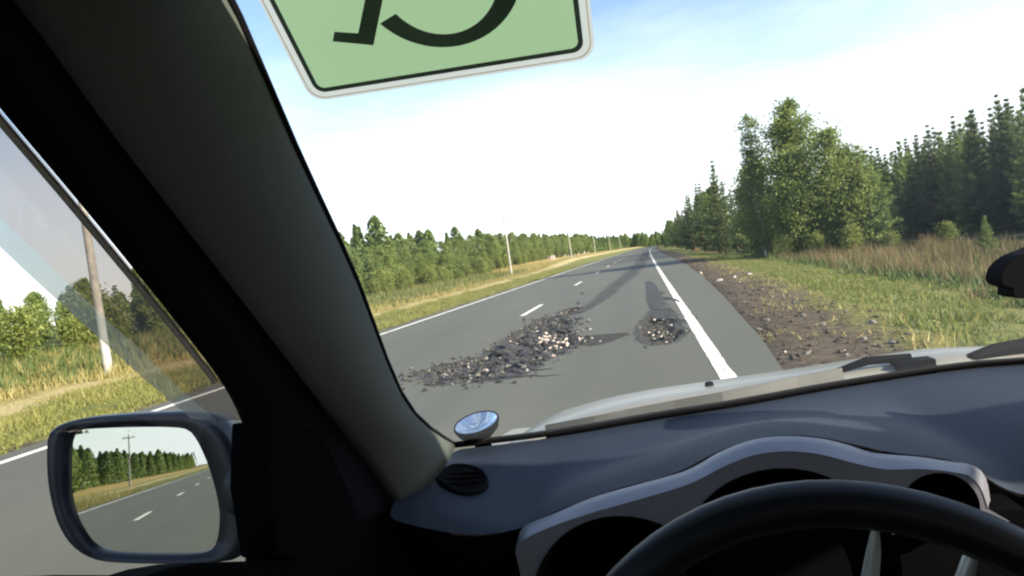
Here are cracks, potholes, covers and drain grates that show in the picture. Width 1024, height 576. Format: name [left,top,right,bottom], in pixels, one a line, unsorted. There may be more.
pothole [419,316,573,383]
pothole [638,311,684,344]
